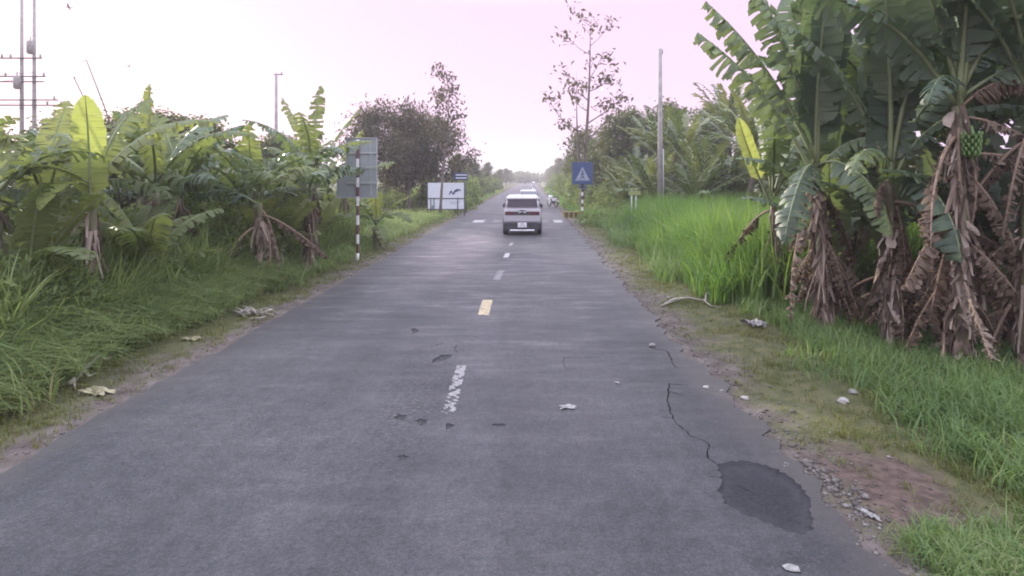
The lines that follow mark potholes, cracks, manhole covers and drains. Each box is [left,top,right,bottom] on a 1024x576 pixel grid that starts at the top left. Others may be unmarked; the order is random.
crack [637,347,719,477]
